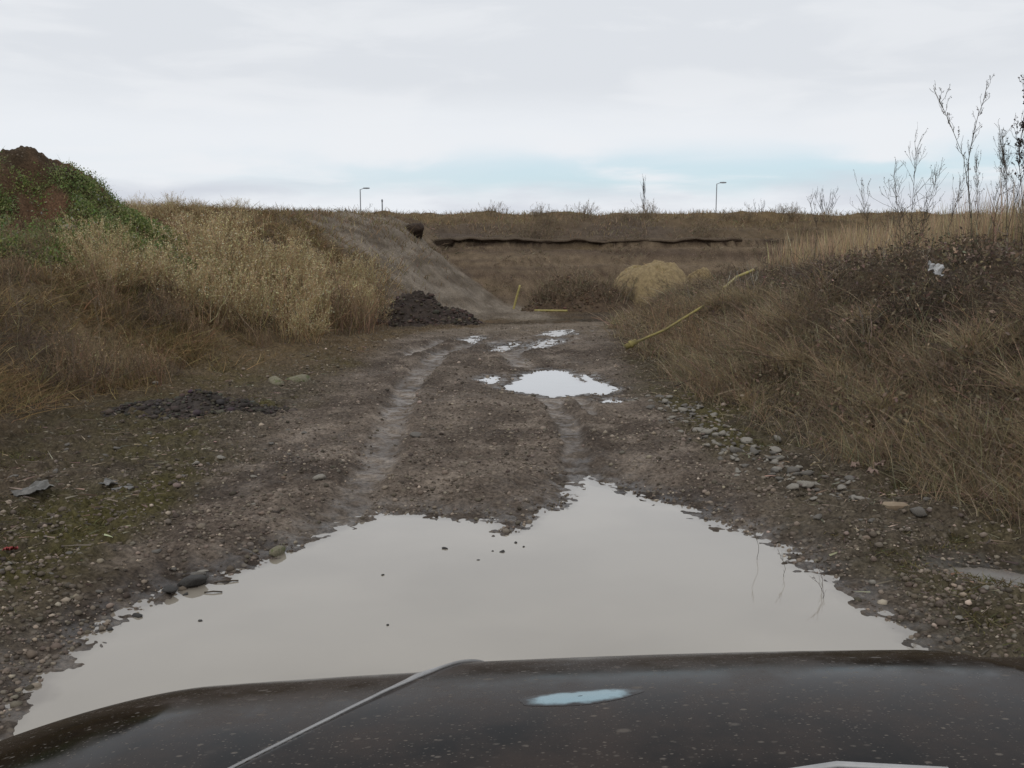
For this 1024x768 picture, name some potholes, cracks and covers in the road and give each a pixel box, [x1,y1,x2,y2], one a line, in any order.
pothole [495,369,623,398]
pothole [0,472,957,741]
